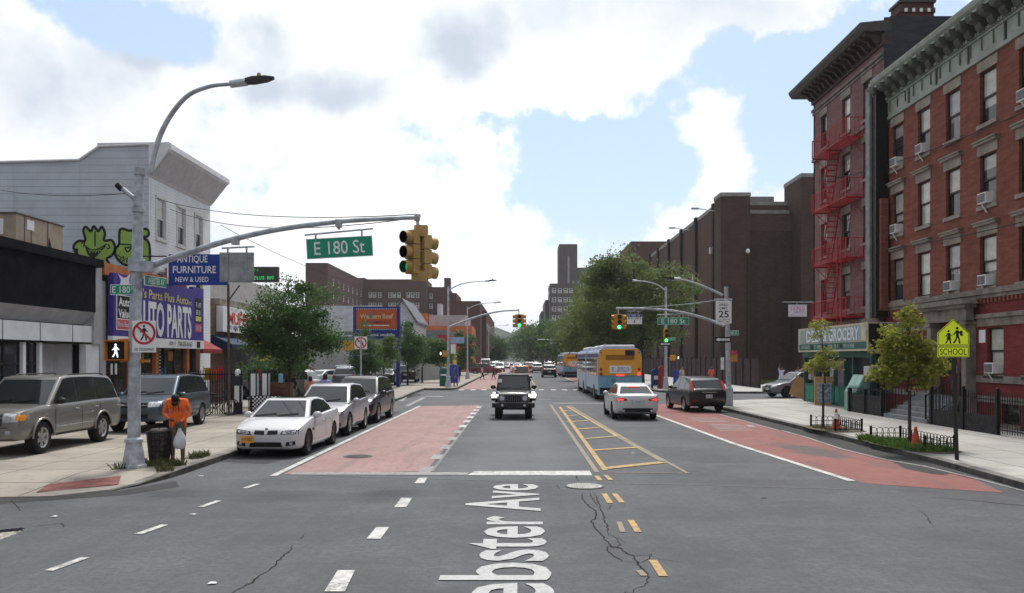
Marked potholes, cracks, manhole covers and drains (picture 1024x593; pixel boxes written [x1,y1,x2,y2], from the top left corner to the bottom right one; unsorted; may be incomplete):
crack [556,476,679,593]
crack [232,536,304,593]
